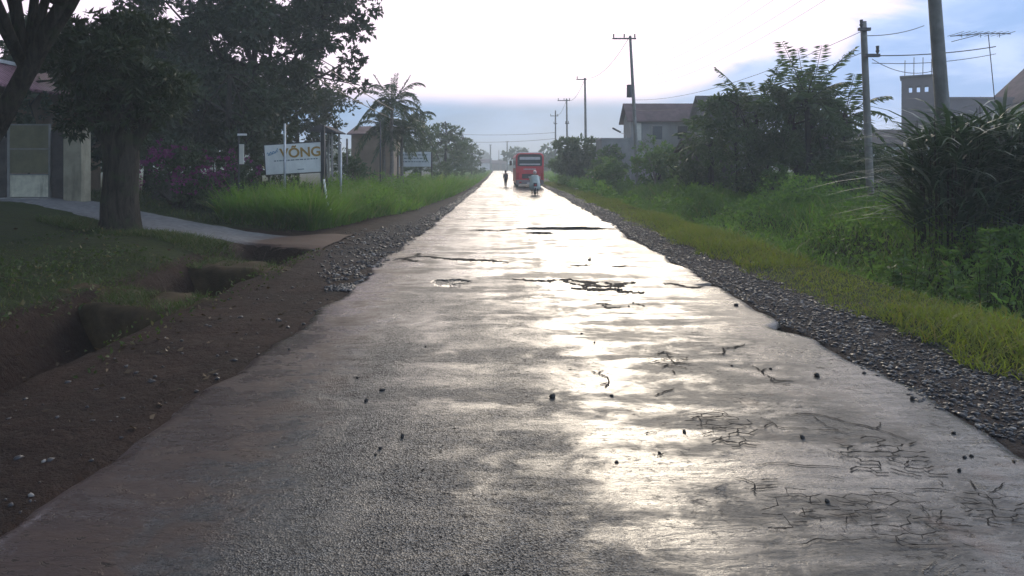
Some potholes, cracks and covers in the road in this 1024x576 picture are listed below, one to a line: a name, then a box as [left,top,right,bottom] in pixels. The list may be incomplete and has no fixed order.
crack [712,344,793,384]
crack [639,349,689,396]
pothole [429,278,473,288]
crack [732,413,1024,546]
crack [685,410,758,447]
crack [395,253,645,308]
